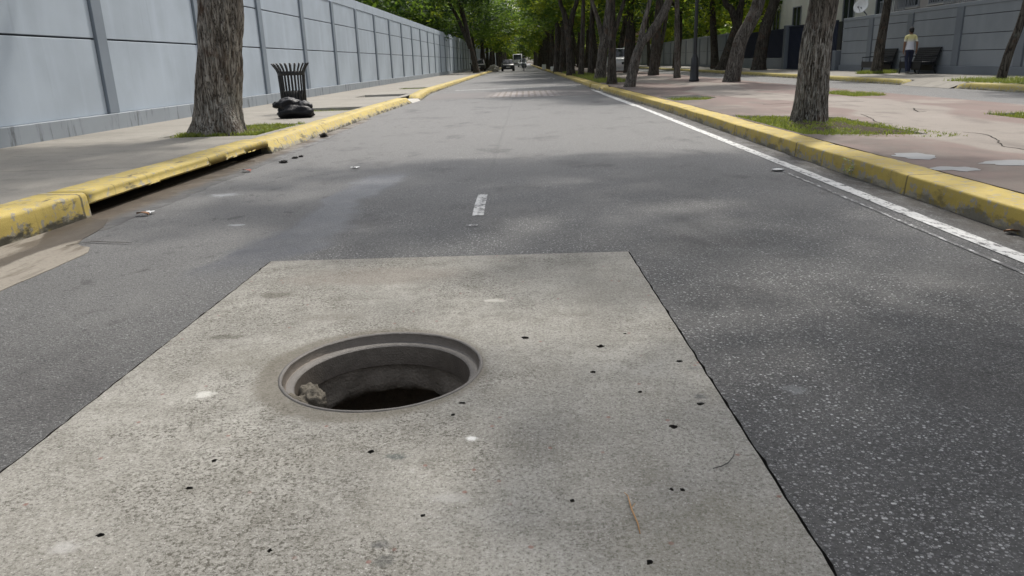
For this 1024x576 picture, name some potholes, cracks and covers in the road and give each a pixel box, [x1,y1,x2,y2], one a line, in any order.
manhole cover [278,332,483,413]
